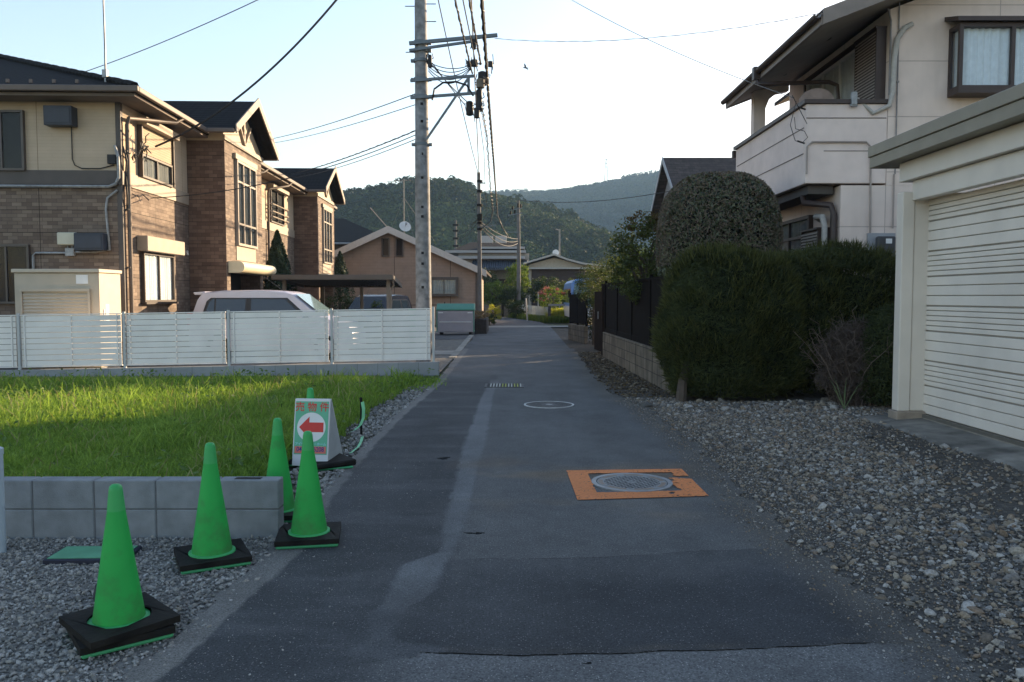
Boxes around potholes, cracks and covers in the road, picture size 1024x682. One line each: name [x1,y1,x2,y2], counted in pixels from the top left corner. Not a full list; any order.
manhole cover [592,473,673,492]
